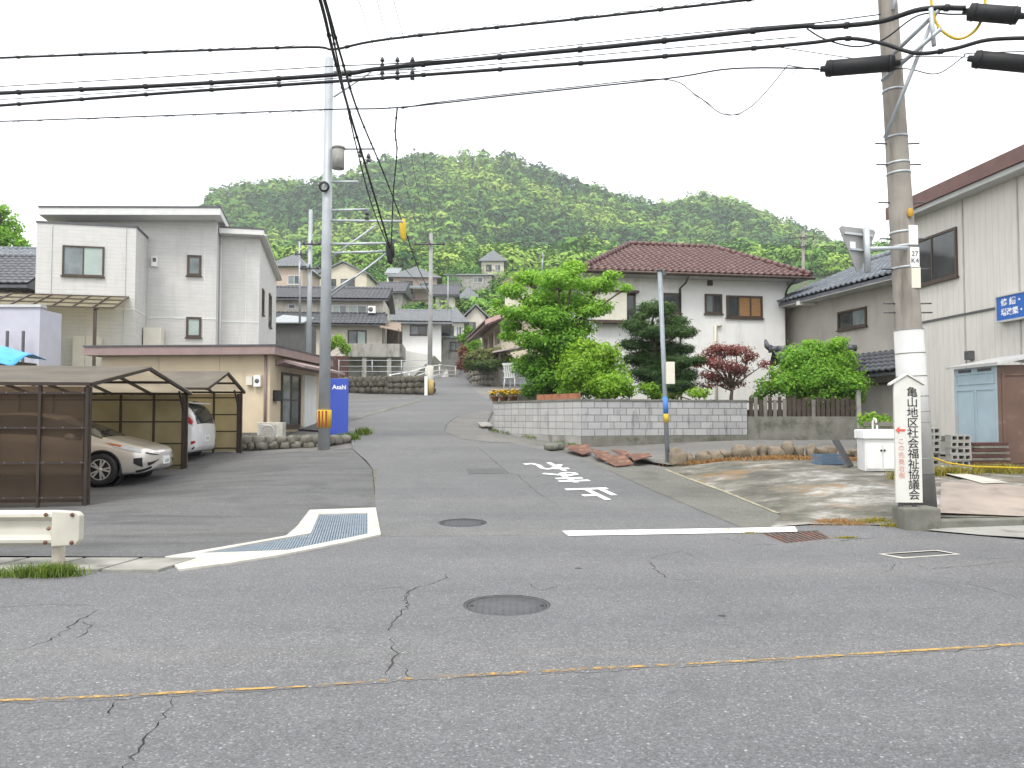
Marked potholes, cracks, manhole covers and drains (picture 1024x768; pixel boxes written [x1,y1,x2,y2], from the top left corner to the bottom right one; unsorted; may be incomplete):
drain grate [760,530,831,545]
manhole cover [464,595,550,616]
manhole cover [439,519,487,527]
crack [14,604,97,650]
crack [366,575,448,677]
manhole cover [881,550,958,558]
drain grate [165,507,381,571]
crack [122,699,174,768]
